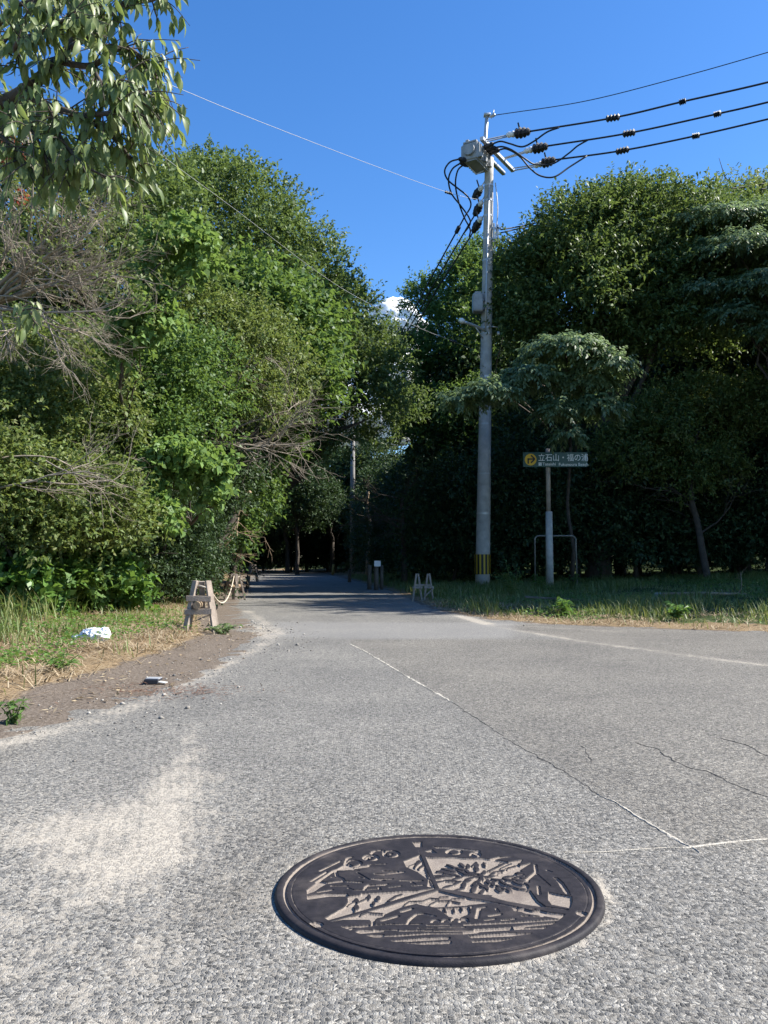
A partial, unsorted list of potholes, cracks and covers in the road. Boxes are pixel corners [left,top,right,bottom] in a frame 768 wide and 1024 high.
crack [635,742,767,797]
manhole cover [274,834,605,968]
